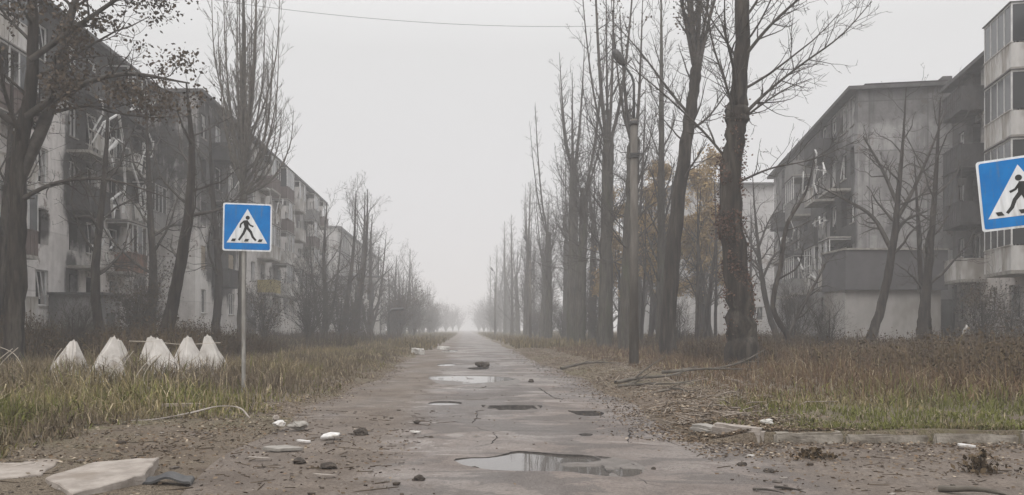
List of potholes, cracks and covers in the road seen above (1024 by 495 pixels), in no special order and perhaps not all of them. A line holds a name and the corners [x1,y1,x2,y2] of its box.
pothole [428,376,520,386]
crack [454,414,571,447]
pothole [454,451,645,477]
